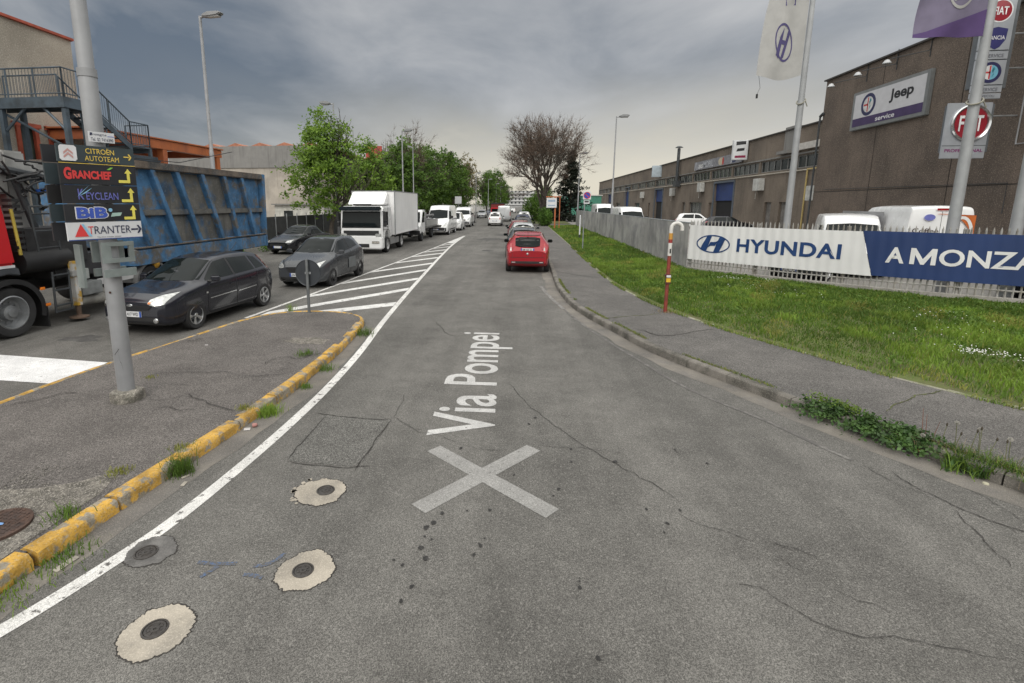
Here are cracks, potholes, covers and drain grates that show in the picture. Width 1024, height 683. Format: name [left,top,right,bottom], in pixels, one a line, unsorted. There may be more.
manhole cover [271,549,337,592]
crack [511,385,749,540]
manhole cover [289,478,347,507]
manhole cover [0,508,34,541]
crack [728,584,1024,660]
manhole cover [122,535,179,568]
manhole cover [114,602,198,664]
crack [872,470,1024,566]
crack [147,352,321,411]
